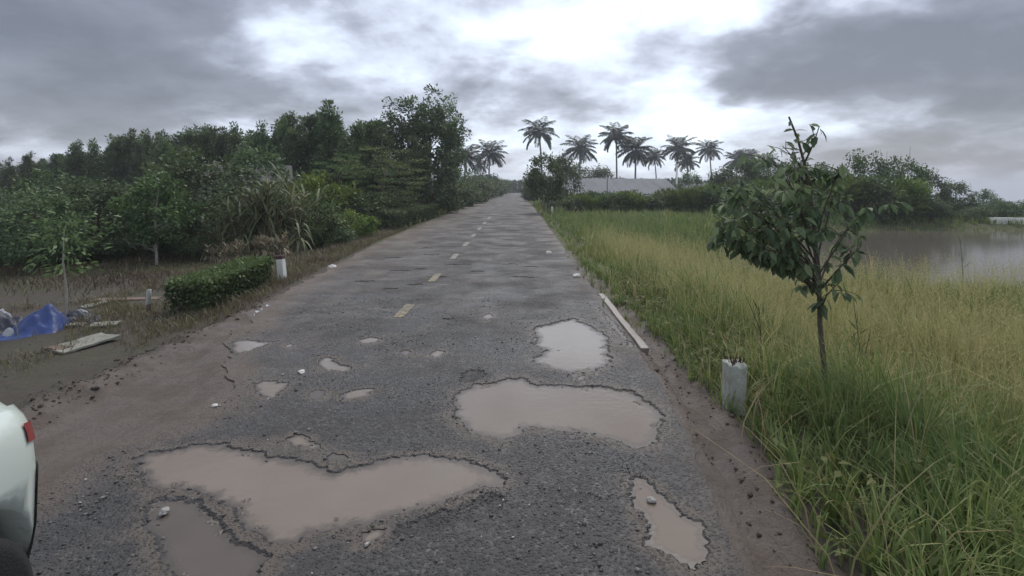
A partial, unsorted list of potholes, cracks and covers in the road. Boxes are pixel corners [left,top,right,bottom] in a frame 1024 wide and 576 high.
pothole [285,433,321,449]
pothole [253,380,290,399]
pothole [532,317,614,372]
pothole [452,377,668,448]
pothole [230,339,279,357]
pothole [316,356,352,372]
pothole [625,475,712,571]
pothole [140,494,274,576]
pothole [130,441,509,545]
pothole [339,388,375,400]
pothole [308,389,325,400]
